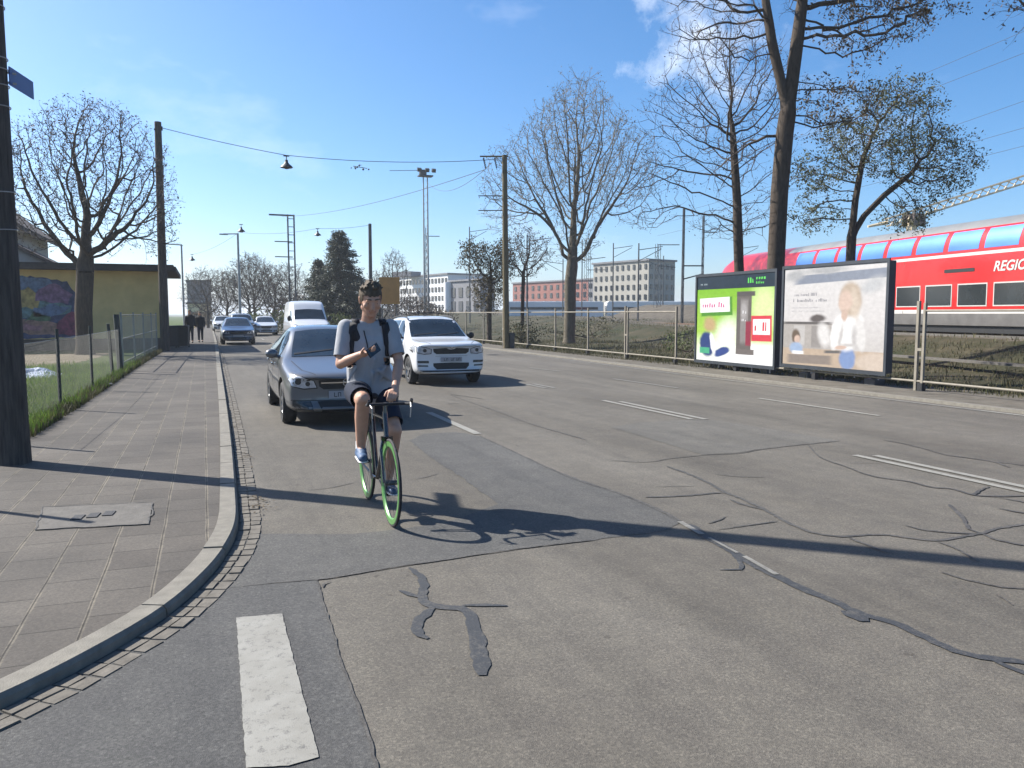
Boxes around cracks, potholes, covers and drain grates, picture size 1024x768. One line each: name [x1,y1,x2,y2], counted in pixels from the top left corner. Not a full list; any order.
crack [942,572,1024,605]
manhole cover [35,502,154,530]
crack [885,440,1024,467]
crack [613,441,835,462]
